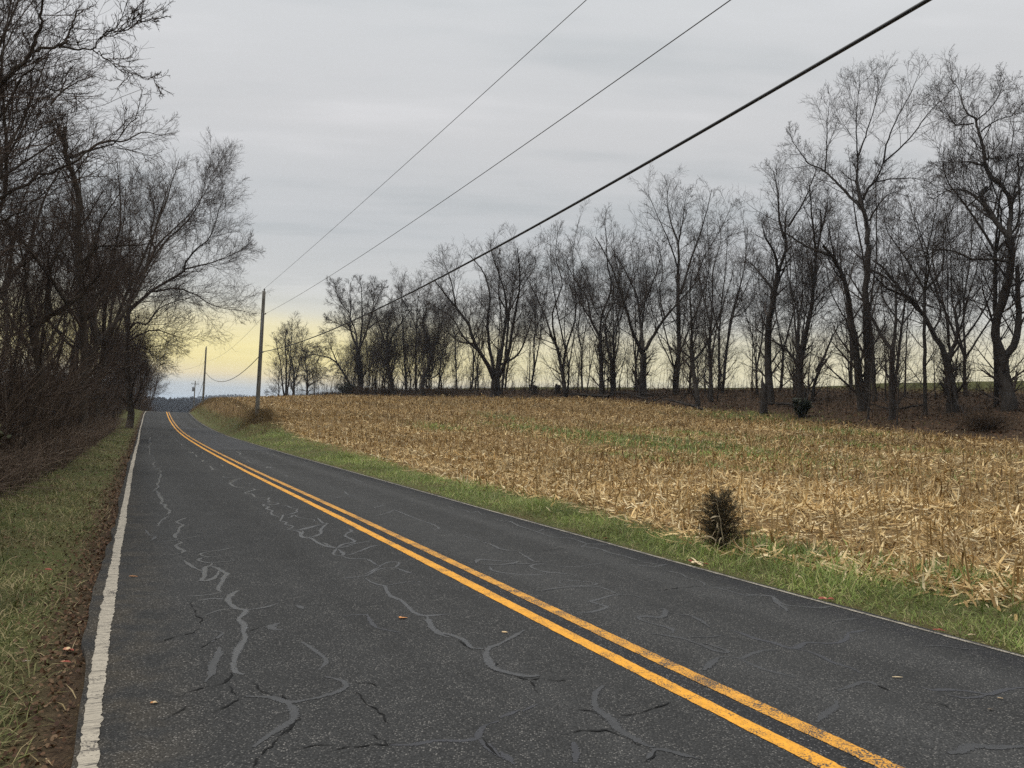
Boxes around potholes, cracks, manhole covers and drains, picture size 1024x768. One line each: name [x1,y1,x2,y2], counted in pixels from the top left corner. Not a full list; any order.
crack [253,681,391,767]
crack [154,672,287,721]
crack [161,601,221,647]
crack [566,701,679,761]
